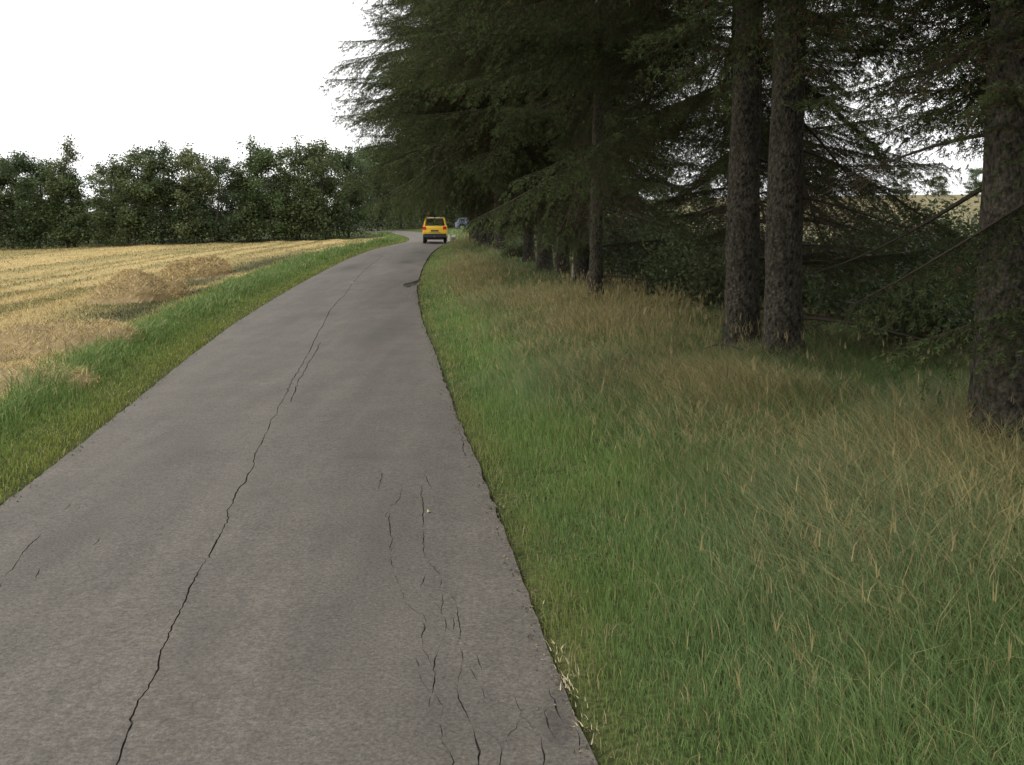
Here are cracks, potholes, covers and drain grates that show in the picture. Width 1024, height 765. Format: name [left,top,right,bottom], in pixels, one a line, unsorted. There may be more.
crack [379,475,580,765]
crack [116,256,383,765]
